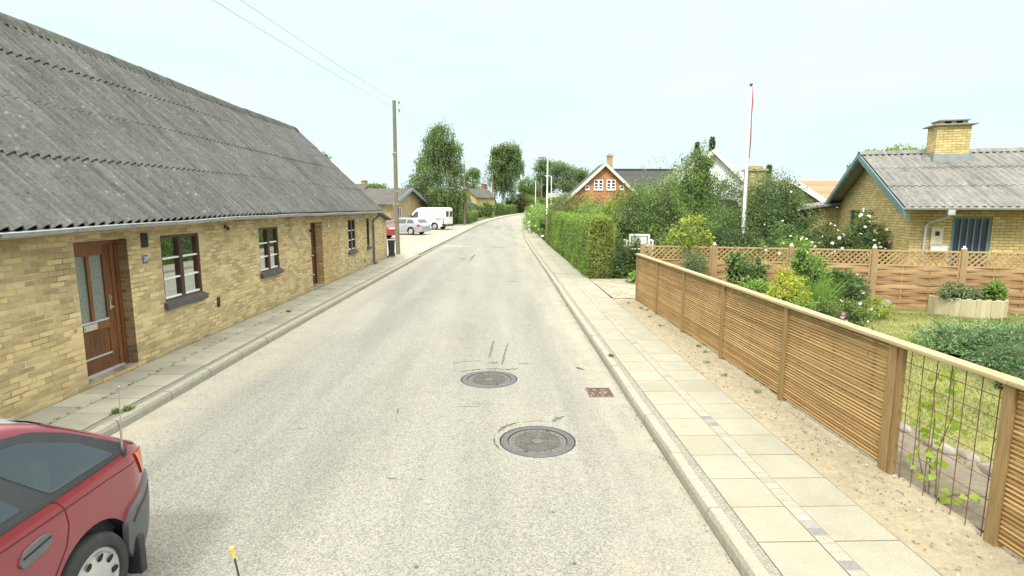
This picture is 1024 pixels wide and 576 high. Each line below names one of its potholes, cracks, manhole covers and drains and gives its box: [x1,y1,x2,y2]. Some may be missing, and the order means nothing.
manhole cover [461,371,517,388]
drain grate [585,388,614,397]
crack [493,416,564,449]
manhole cover [501,426,575,458]
crack [452,341,528,372]
